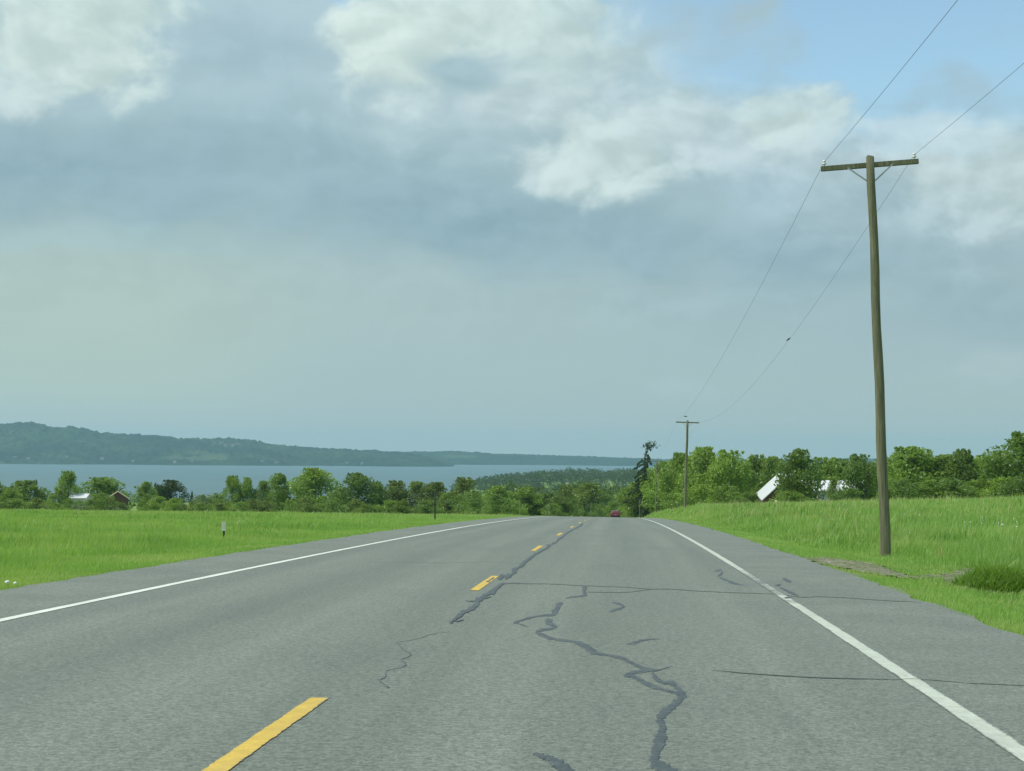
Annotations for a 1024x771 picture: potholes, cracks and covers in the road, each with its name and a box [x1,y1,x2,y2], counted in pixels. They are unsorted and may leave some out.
crack [378,631,451,688]
crack [505,569,917,771]
